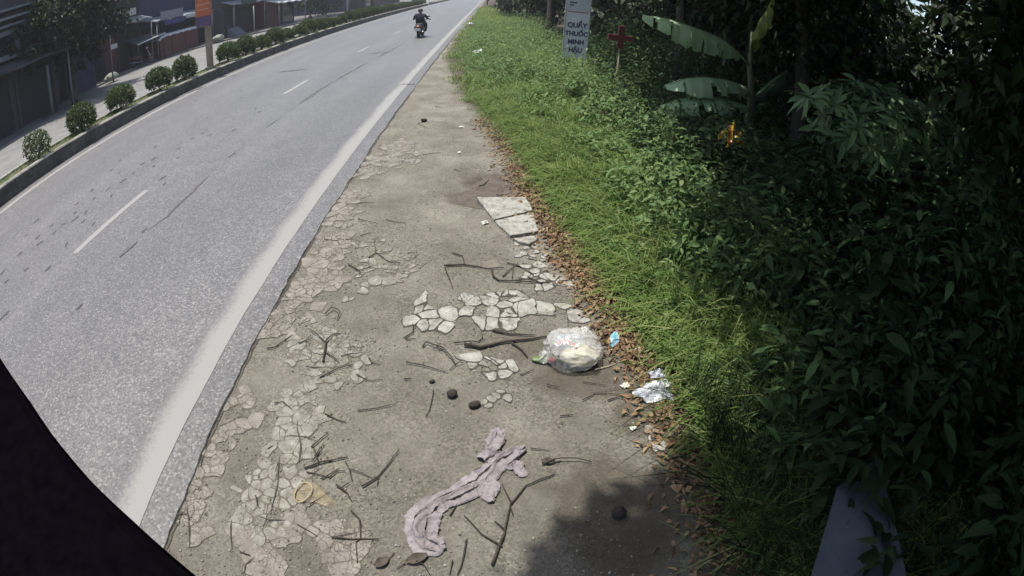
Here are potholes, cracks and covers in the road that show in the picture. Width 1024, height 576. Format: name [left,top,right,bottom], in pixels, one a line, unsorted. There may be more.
crack [166,32,592,576]
